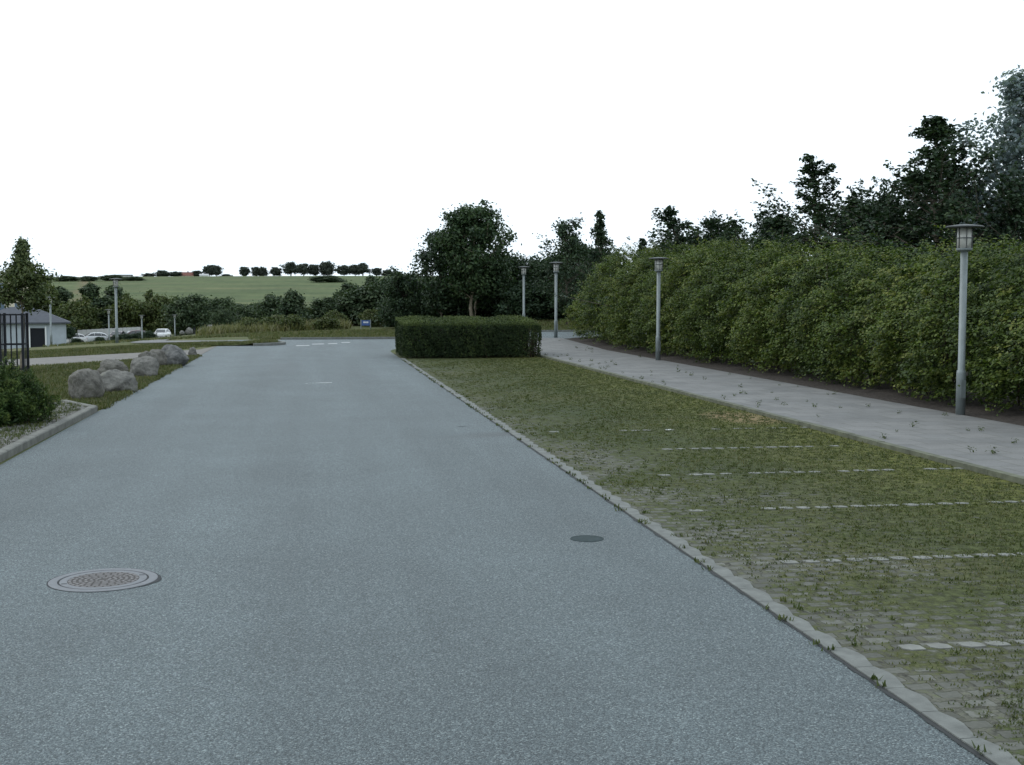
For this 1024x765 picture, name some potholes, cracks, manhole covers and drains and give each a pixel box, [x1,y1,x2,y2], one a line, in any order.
manhole cover [47,568,162,592]
